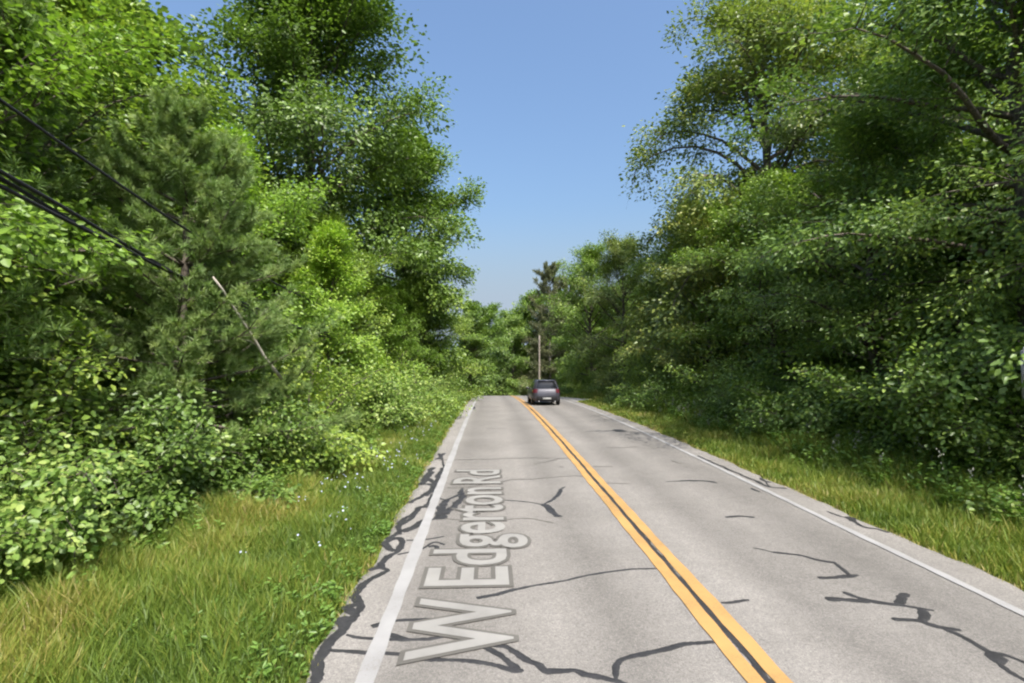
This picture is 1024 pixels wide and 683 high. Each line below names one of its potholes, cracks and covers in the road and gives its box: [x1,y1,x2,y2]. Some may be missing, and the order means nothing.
crack [826,511,889,533]
crack [672,456,787,492]
